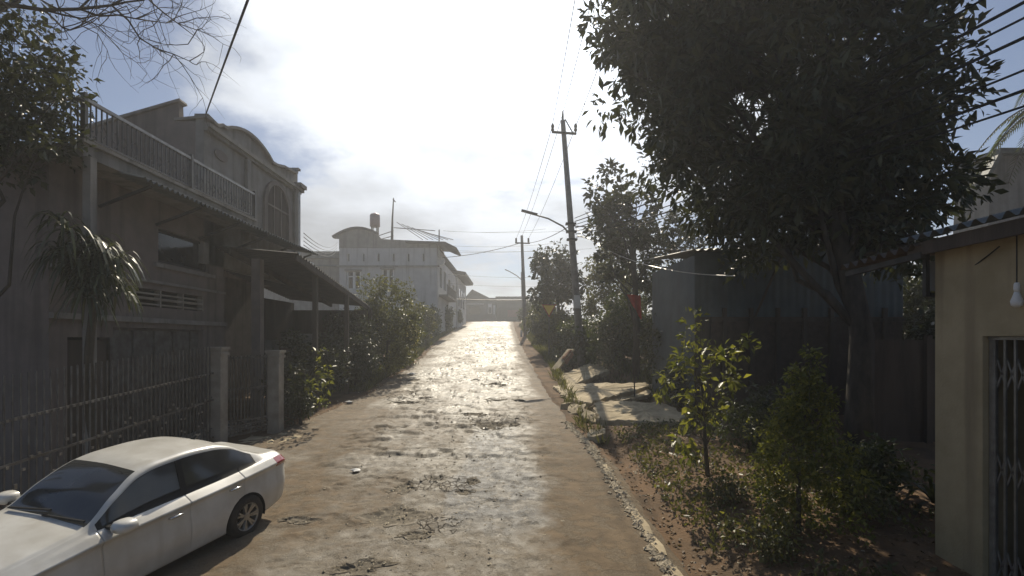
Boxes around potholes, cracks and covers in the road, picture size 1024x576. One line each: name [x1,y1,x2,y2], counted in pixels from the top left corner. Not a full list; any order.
pothole [276,515,324,525]
pothole [329,557,402,576]
pothole [394,530,436,541]
pothole [469,420,506,431]
